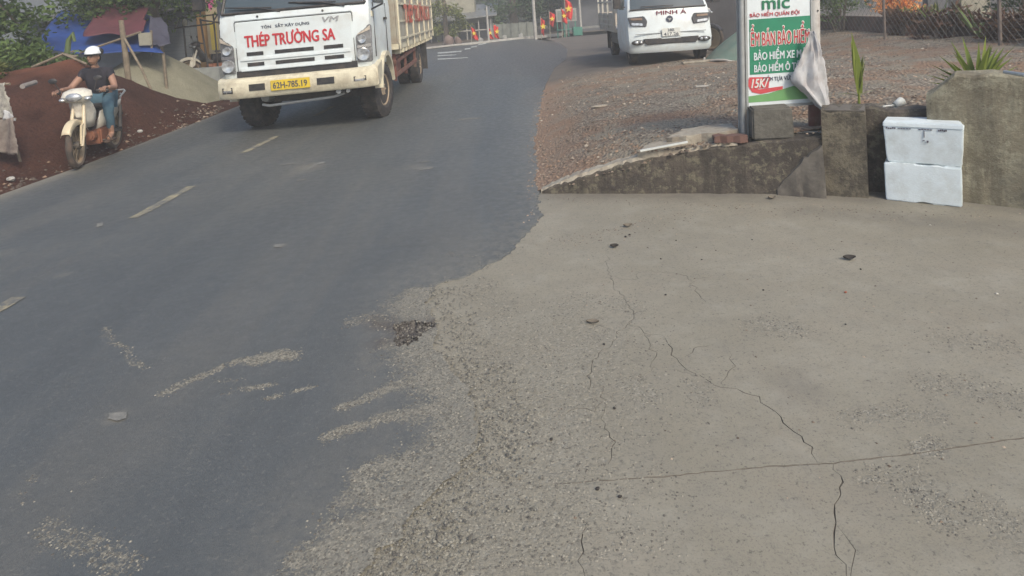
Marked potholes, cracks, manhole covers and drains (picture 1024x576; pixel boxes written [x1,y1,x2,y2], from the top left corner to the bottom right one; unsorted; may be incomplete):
pothole [393,320,435,347]
crack [566,253,856,576]
